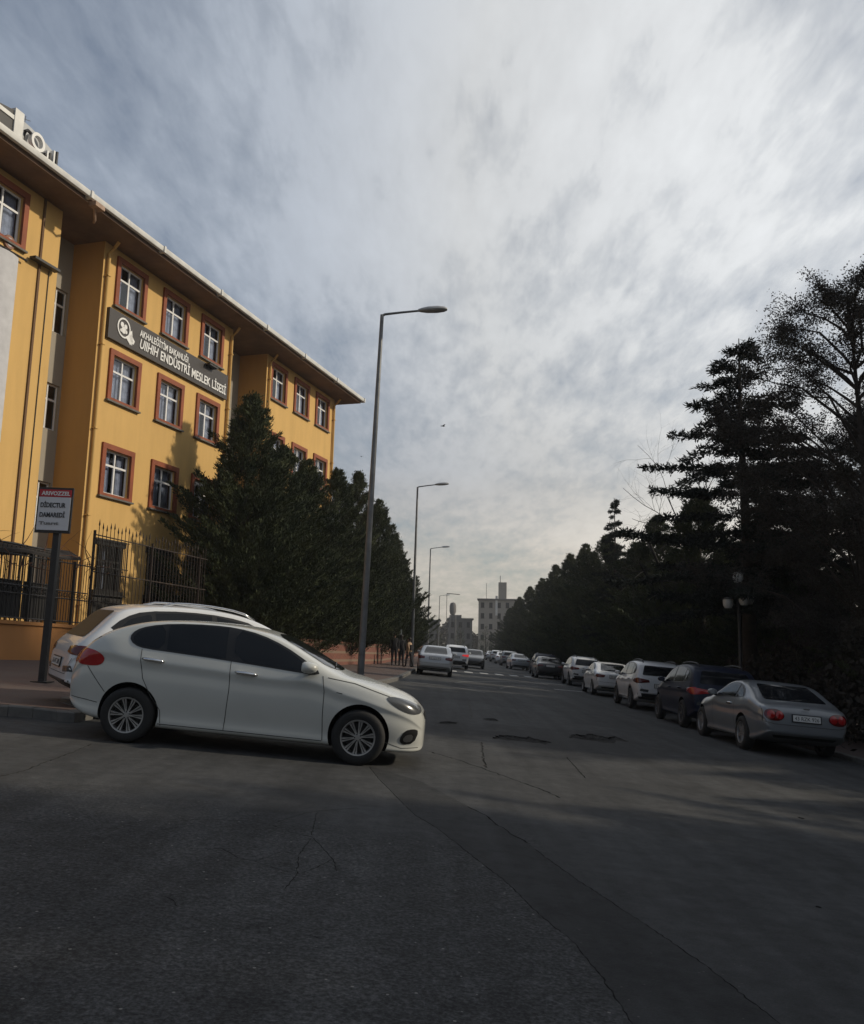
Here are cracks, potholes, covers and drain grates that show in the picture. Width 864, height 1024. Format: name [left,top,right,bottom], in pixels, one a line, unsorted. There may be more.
pothole [492,735,551,745]
pothole [569,733,628,743]
crack [191,808,351,890]
